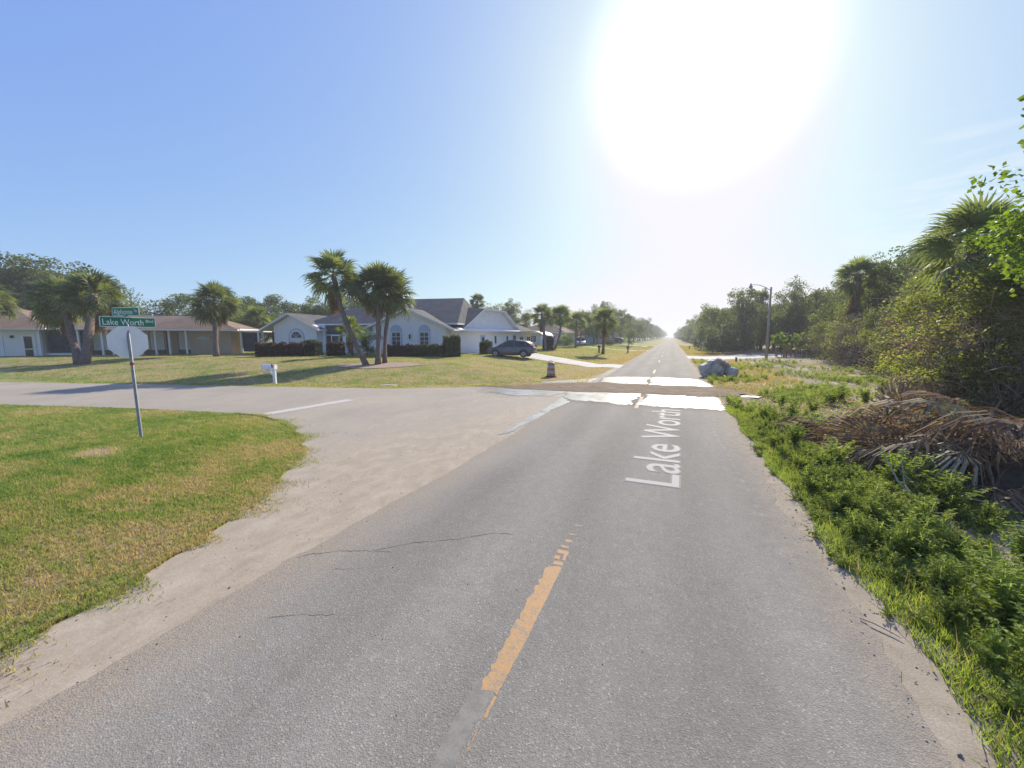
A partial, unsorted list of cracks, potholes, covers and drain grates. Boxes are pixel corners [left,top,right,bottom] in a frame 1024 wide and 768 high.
crack [299,533,508,569]
